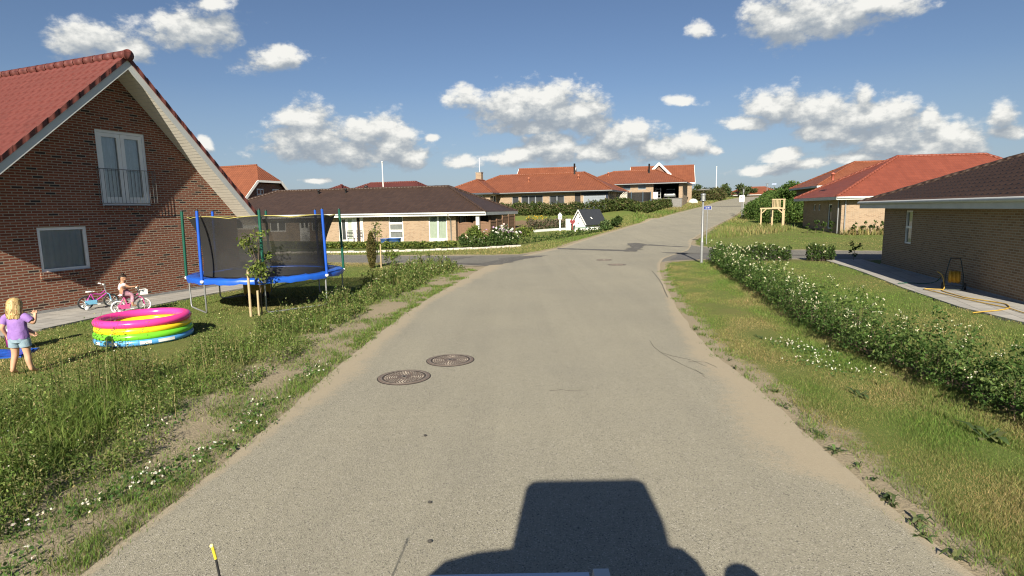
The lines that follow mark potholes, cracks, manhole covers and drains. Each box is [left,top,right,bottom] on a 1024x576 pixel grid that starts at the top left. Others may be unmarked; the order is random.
manhole cover [426,354,474,367]
manhole cover [377,370,431,385]
